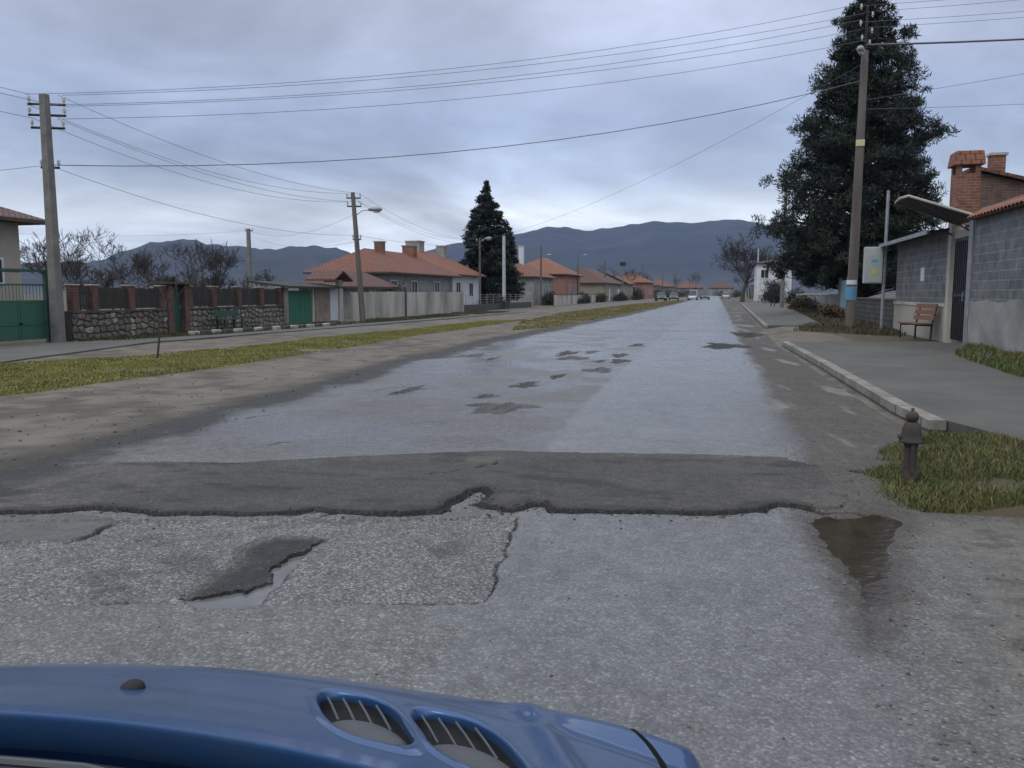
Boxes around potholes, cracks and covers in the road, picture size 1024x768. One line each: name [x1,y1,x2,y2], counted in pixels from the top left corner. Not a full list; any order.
crack [0,470,862,606]
pothole [177,535,329,609]
pothole [465,402,542,415]
pothole [386,385,427,396]
